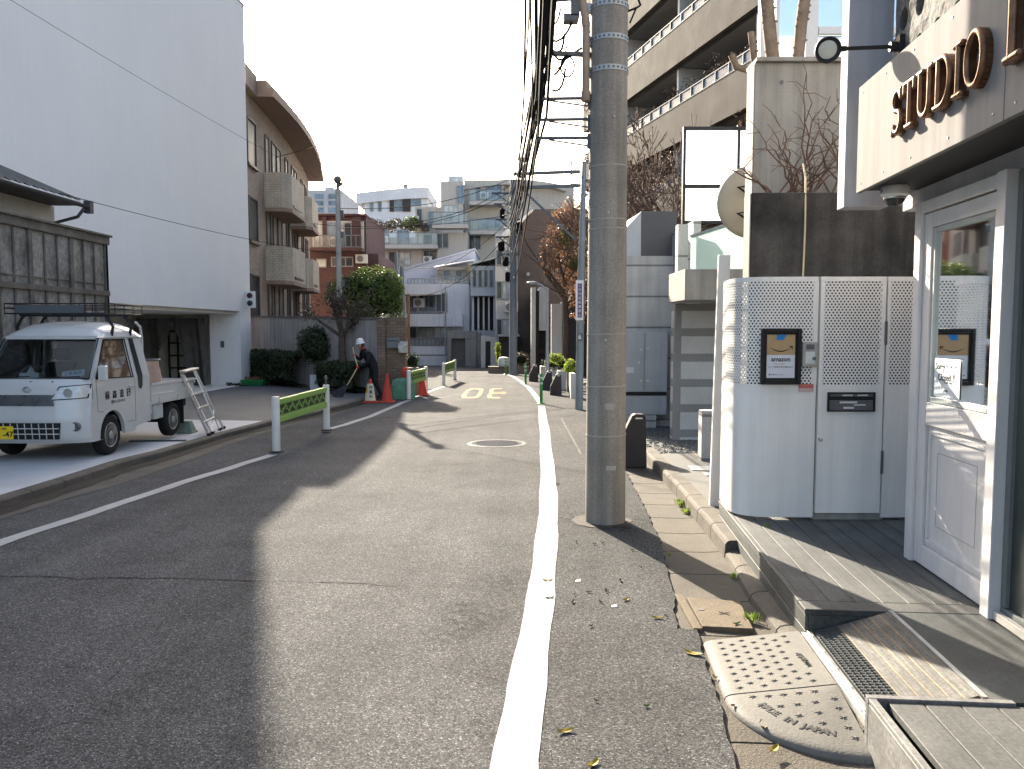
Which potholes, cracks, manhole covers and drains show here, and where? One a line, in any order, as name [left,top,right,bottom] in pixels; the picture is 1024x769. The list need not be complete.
crack [92,614,170,694]
manhole cover [467,440,527,448]
